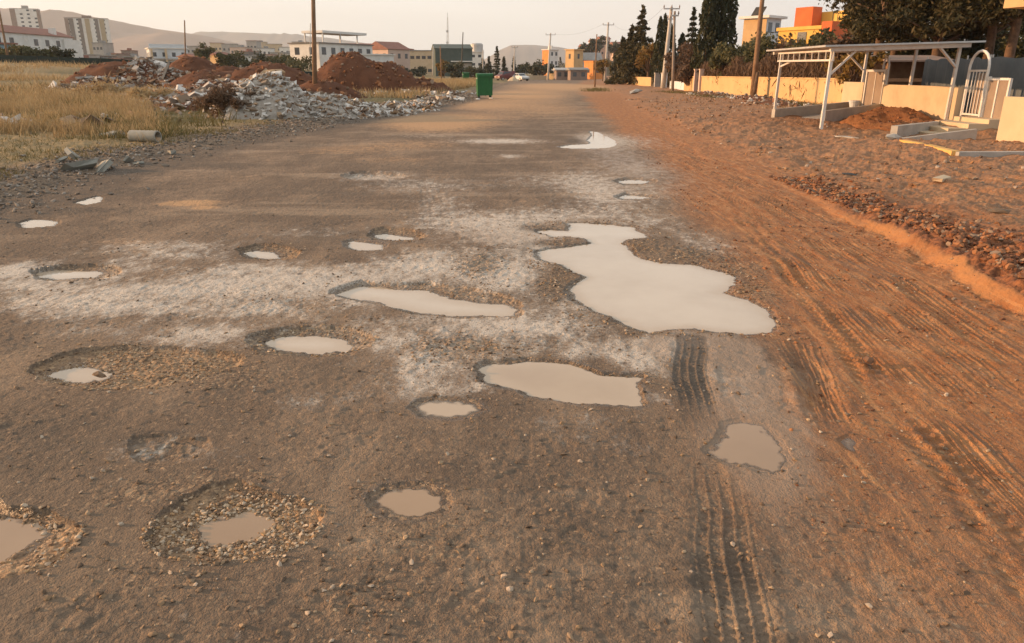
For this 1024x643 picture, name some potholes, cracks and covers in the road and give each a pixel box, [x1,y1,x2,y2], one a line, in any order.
pothole [25,343,249,391]
pothole [0,496,86,581]
pothole [362,479,456,524]
pothole [243,325,381,358]
pothole [404,394,489,420]
pothole [555,131,620,149]
pothole [471,355,651,408]
pothole [613,192,659,201]
pothole [366,226,429,242]
pothole [340,238,391,251]
pothole [27,263,124,281]
pothole [326,279,527,319]
